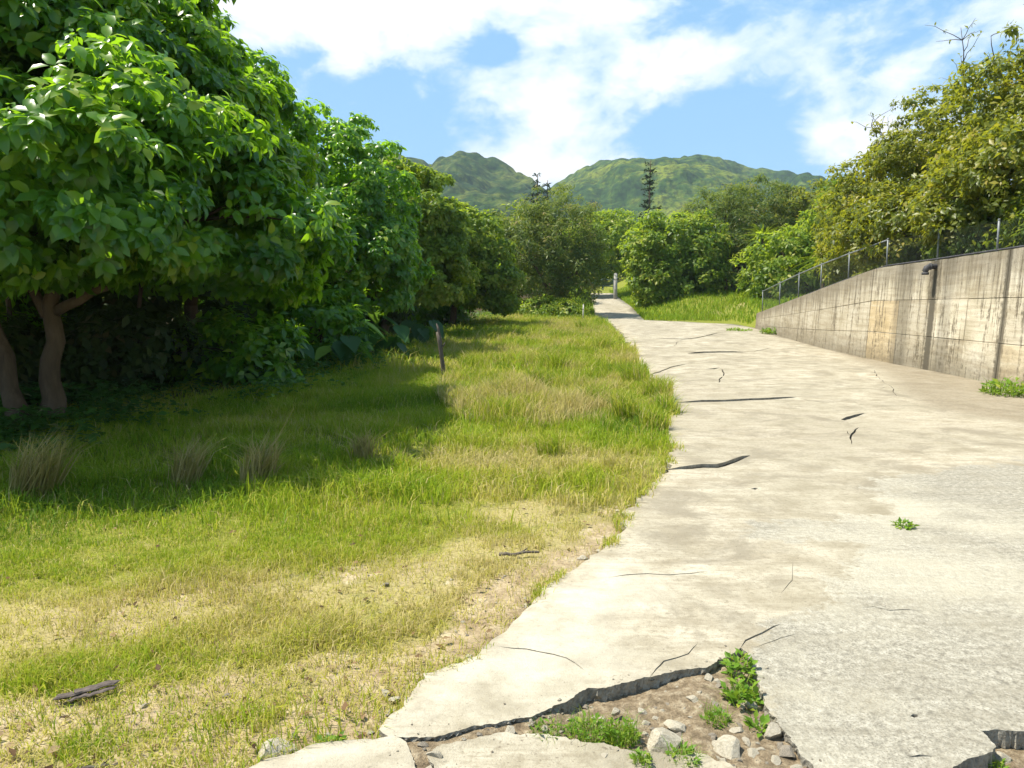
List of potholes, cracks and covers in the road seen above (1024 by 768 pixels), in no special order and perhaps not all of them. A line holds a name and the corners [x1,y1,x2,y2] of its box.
crack [498,646,584,670]
crack [650,644,697,682]
crack [652,333,818,403]
crack [665,455,750,473]
pothole [394,648,814,768]
